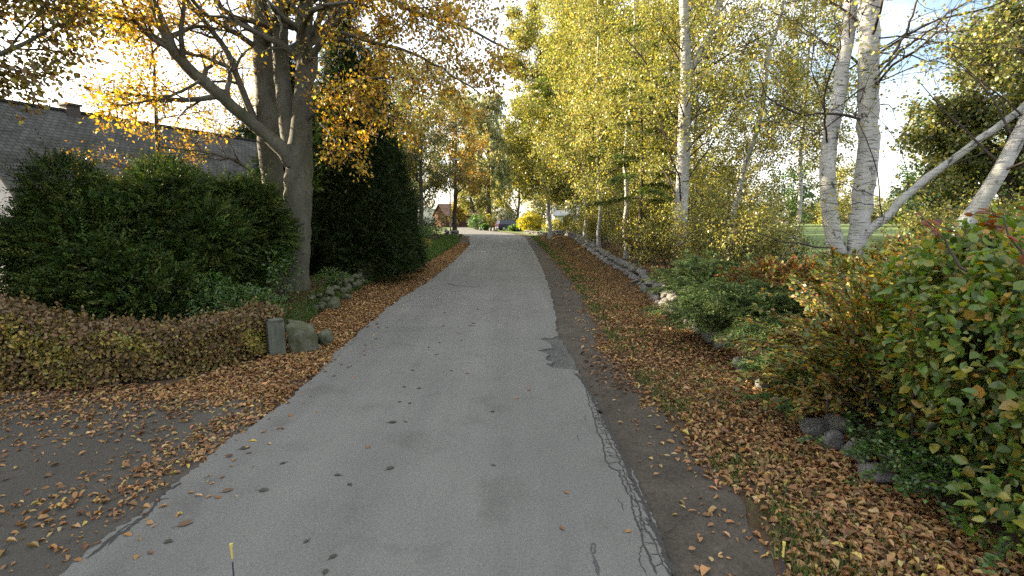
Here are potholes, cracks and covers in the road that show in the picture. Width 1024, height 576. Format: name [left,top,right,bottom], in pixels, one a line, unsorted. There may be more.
crack [573,372,675,576]
